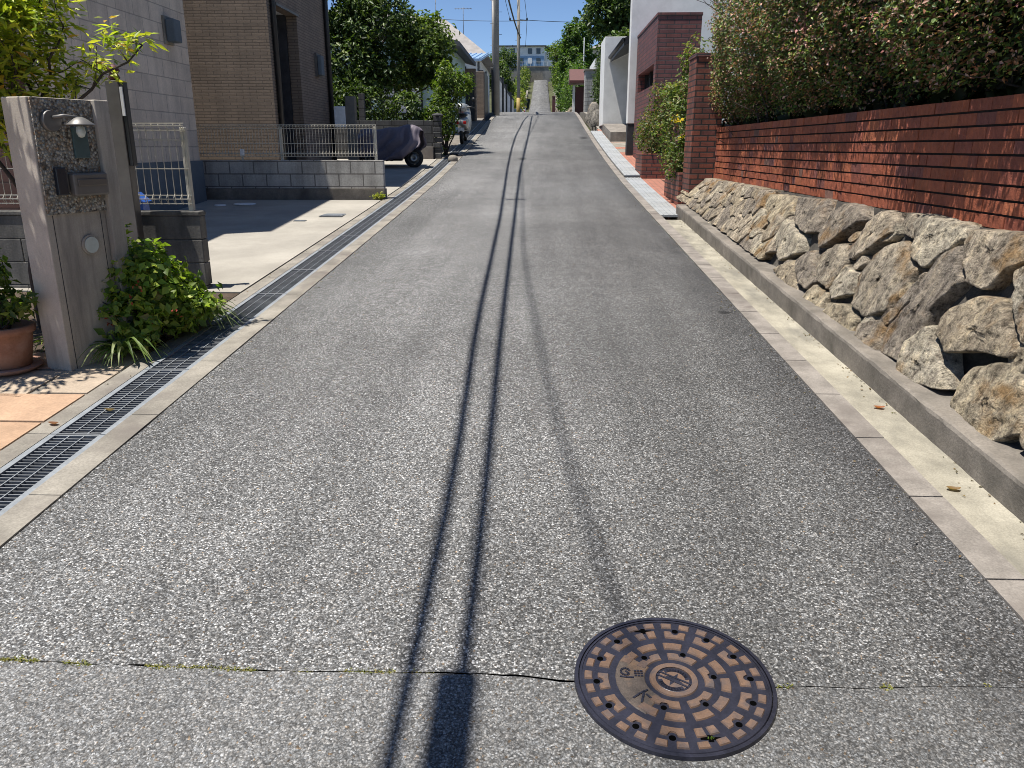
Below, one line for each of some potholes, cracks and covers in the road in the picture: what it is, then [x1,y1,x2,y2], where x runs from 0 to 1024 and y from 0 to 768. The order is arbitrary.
drain grate [317,235,360,251]
drain grate [372,204,401,213]
drain grate [51,369,188,435]
drain grate [255,269,317,294]
drain grate [385,196,411,204]
drain grate [357,213,390,223]
drain grate [209,294,286,326]
drain grate [145,325,245,370]
drain grate [0,434,104,516]
drain grate [291,251,341,270]
manhole cover [574,618,778,761]
crack [0,654,992,691]
